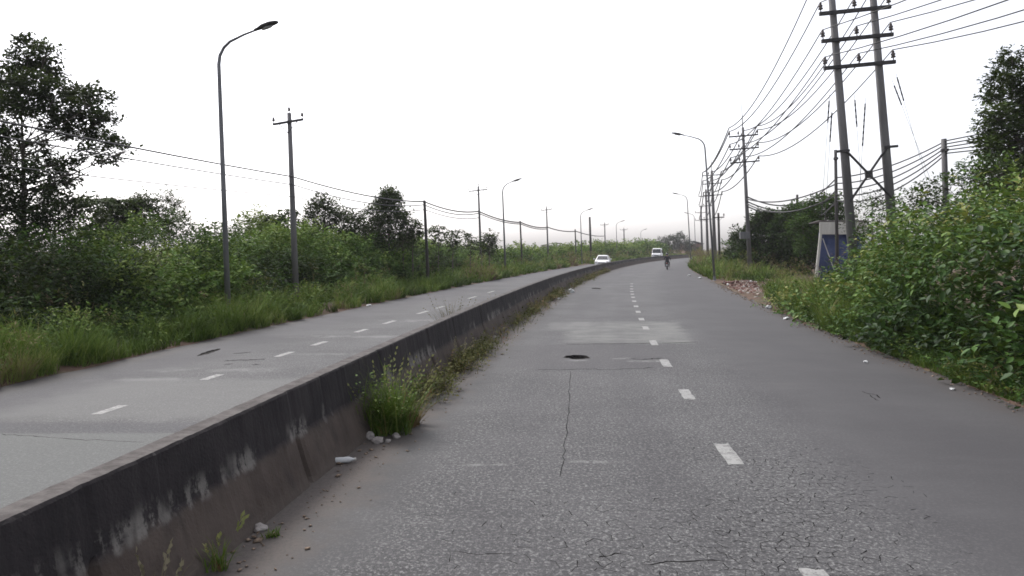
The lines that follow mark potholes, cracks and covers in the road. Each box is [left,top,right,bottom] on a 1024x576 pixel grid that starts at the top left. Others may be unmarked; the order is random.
crack [549,342,686,475]
crack [433,437,973,576]
